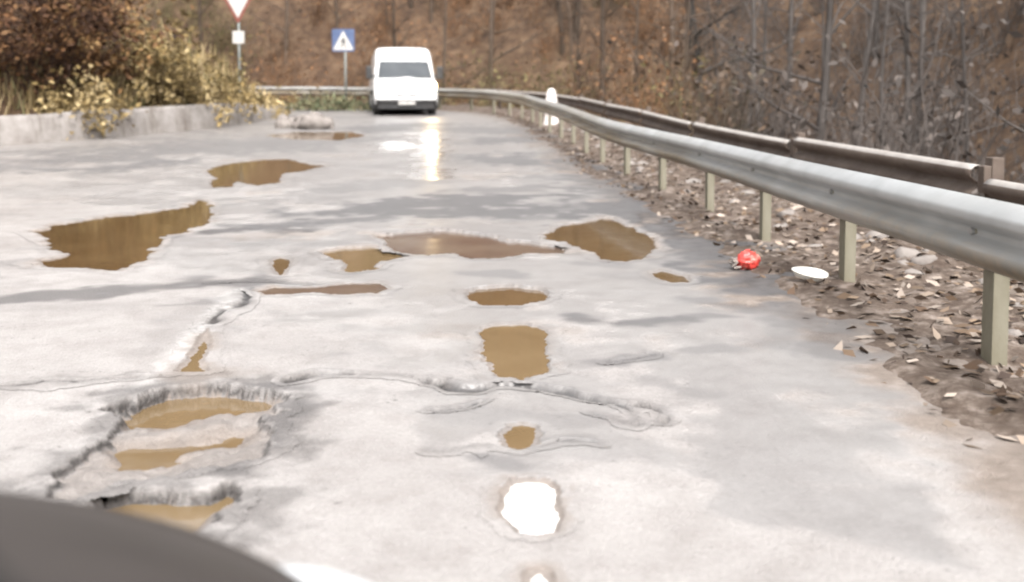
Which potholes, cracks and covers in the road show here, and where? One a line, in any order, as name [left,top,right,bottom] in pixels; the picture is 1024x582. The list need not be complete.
pothole [363,226,580,260]
pothole [451,282,564,308]
pothole [240,279,404,297]
pothole [525,213,674,264]
pothole [476,470,585,543]
crack [270,348,682,458]
crack [0,369,190,391]
pothole [70,470,261,539]
pothole [157,324,227,376]
pothole [16,376,305,502]
pothole [478,416,561,455]
